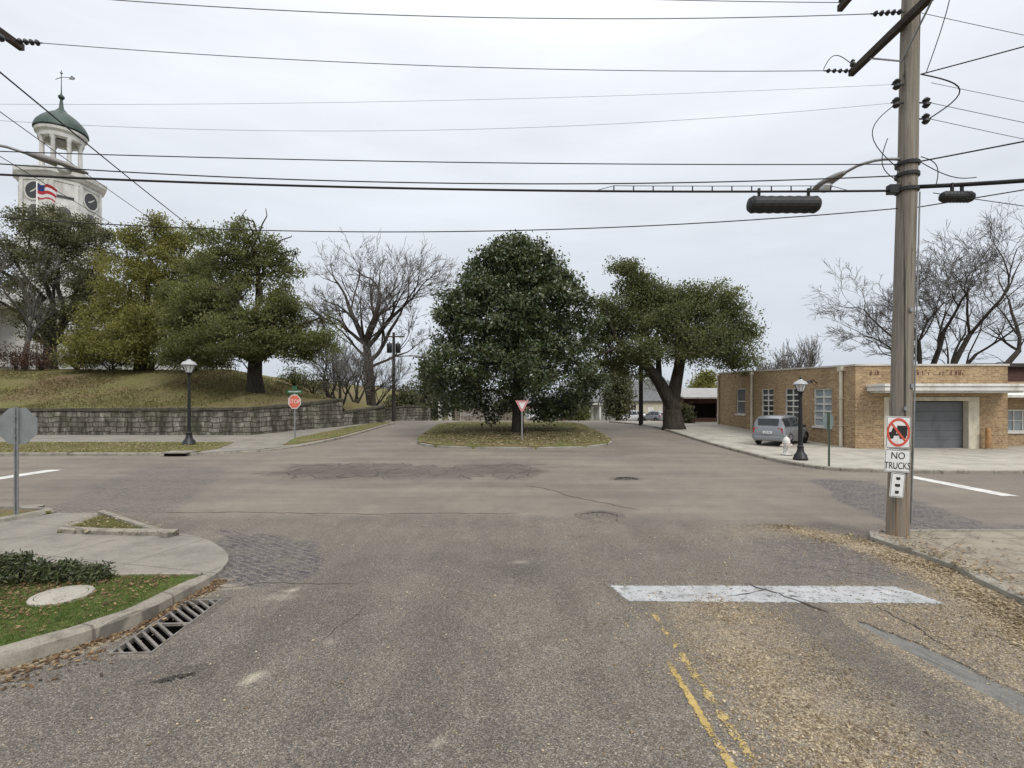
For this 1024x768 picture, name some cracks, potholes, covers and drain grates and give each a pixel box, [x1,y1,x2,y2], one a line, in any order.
manhole cover [26,585,95,607]
drain grate [91,597,233,660]
crack [738,582,828,612]
crack [877,606,960,653]
crack [272,462,638,510]
